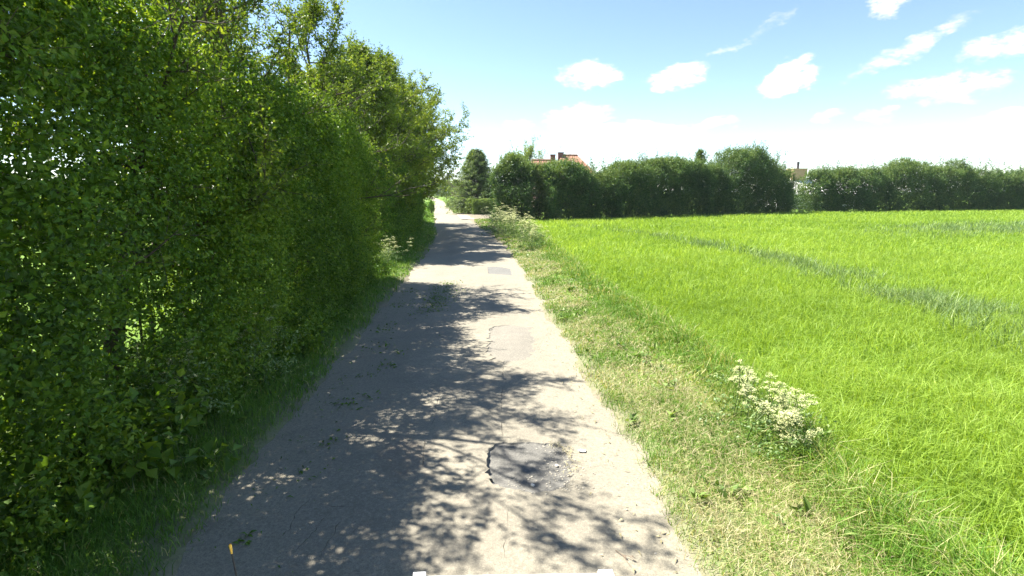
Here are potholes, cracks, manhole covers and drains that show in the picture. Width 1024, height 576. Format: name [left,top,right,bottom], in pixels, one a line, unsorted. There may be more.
crack [282,499,356,552]
pothole [485,442,574,493]
